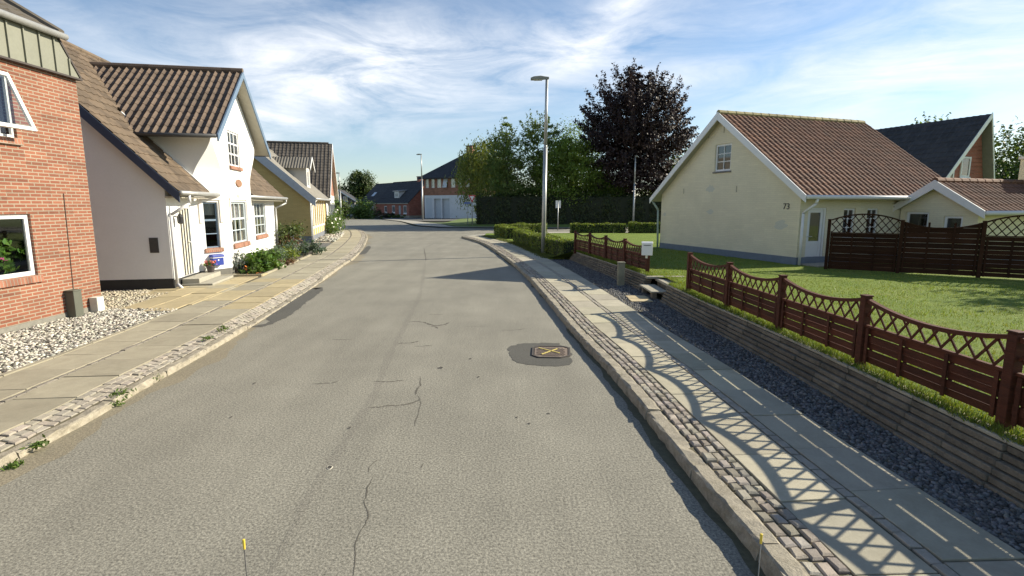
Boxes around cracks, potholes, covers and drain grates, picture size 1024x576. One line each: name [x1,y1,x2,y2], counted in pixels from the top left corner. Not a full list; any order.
crack [371,376,421,423]
crack [353,460,377,576]
crack [398,314,448,346]
manhole cover [532,346,570,358]
